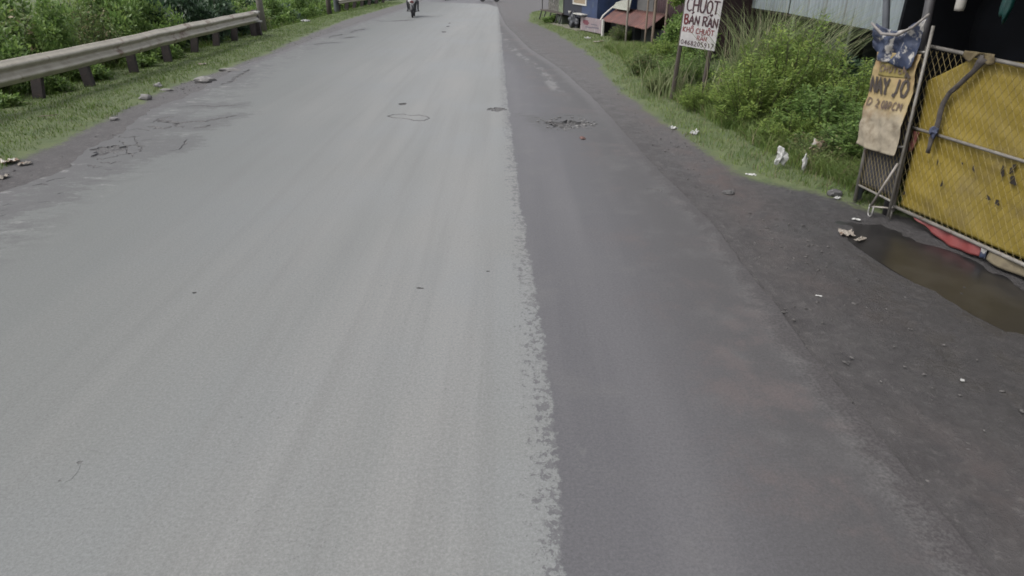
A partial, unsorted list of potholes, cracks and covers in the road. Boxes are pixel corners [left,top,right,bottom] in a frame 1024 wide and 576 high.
crack [221,70,250,85]
pothole [546,120,590,129]
crack [88,105,236,168]
